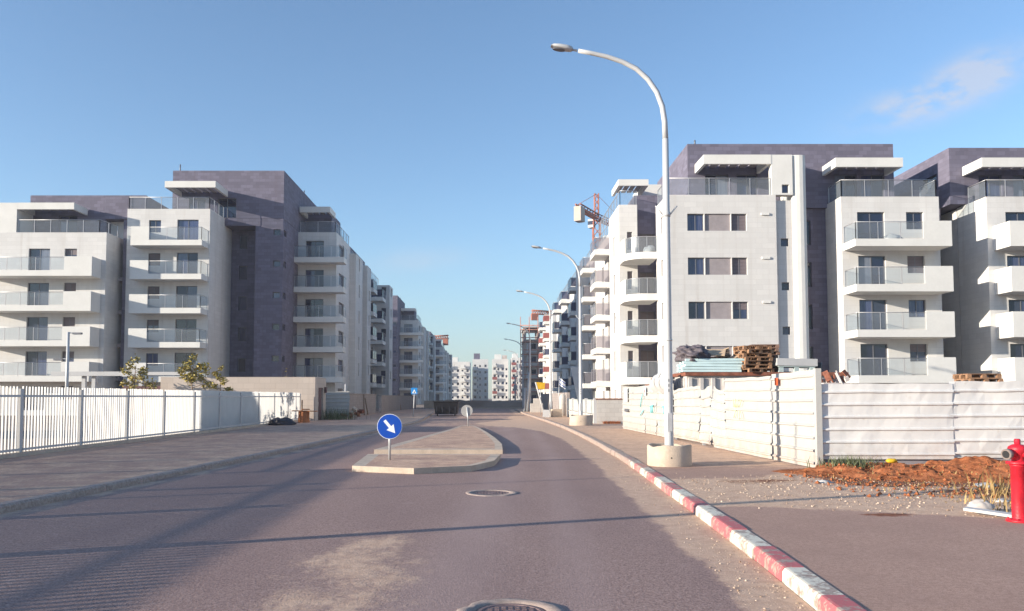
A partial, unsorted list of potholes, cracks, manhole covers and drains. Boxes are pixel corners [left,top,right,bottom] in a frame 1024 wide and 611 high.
manhole cover [466,489,519,497]
manhole cover [456,598,566,611]
